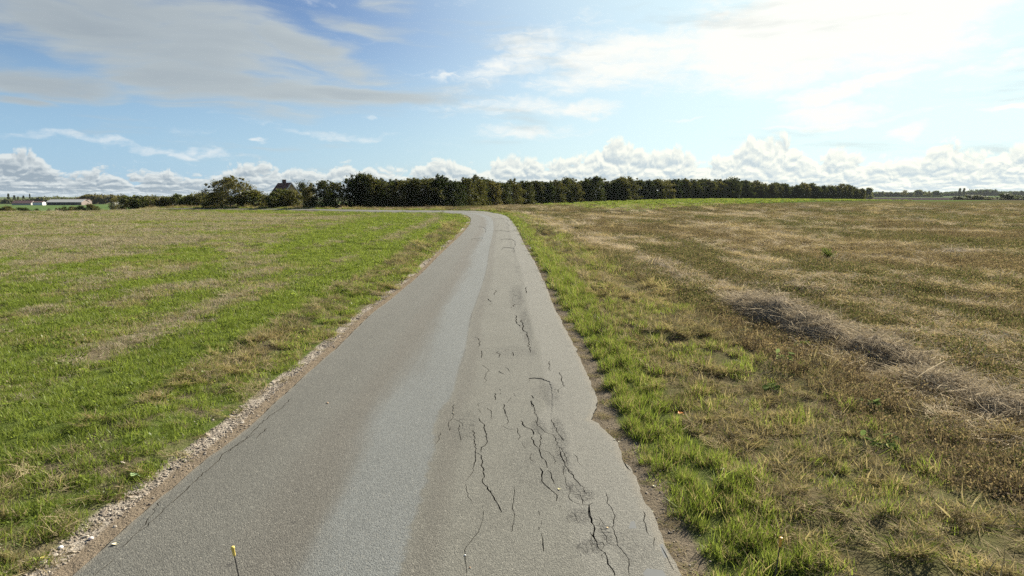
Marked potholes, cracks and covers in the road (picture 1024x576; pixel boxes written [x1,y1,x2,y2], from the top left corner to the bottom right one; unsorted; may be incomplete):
crack [435,288,630,575]
